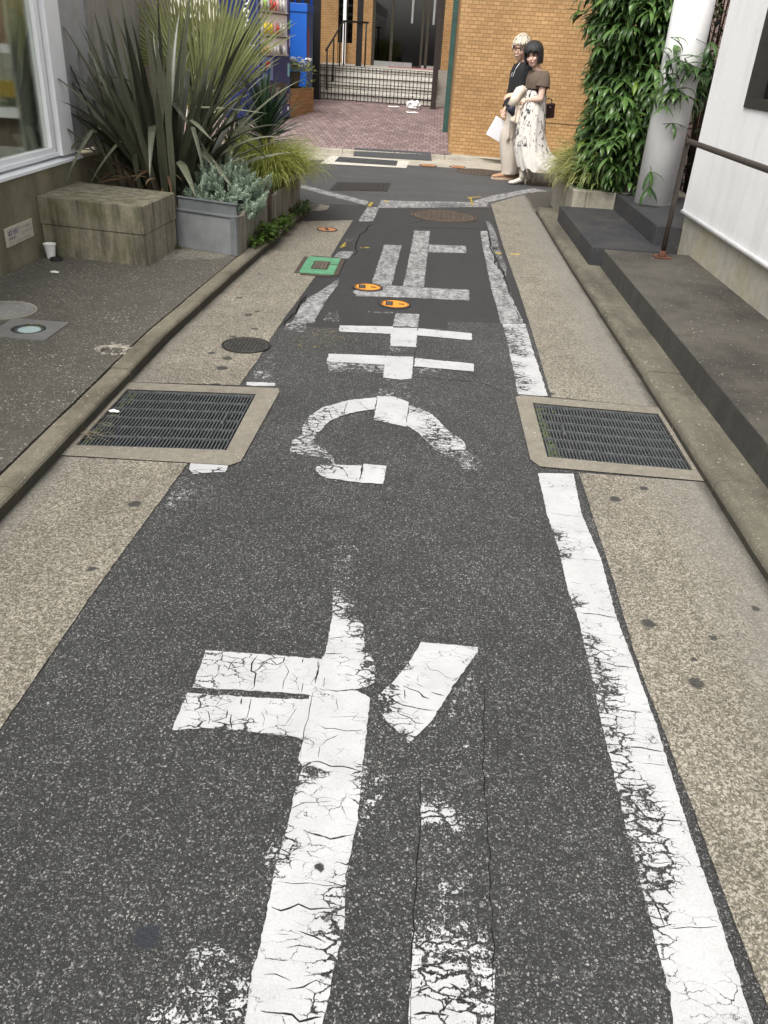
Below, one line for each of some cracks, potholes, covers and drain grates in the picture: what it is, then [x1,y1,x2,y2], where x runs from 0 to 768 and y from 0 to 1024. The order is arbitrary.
drain grate [533,403,692,470]
manhole cover [410,210,477,223]
crack [410,758,471,1024]
utility cover [0,301,37,320]
utility cover [294,255,345,277]
utility cover [352,283,383,292]
drain grate [76,389,255,450]
utility cover [378,299,411,309]
drain grate [335,157,398,166]
crack [482,673,496,1023]
crack [283,295,307,325]
